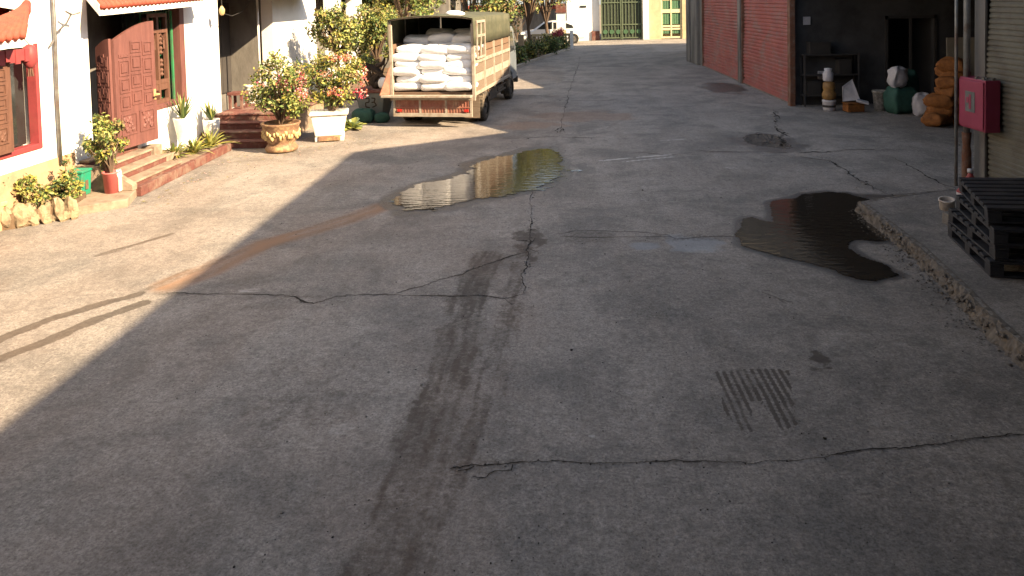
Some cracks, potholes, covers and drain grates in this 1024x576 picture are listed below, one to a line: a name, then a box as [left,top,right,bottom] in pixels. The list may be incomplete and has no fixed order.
crack [829,160,894,196]
crack [175,192,539,304]
crack [452,433,1021,480]
